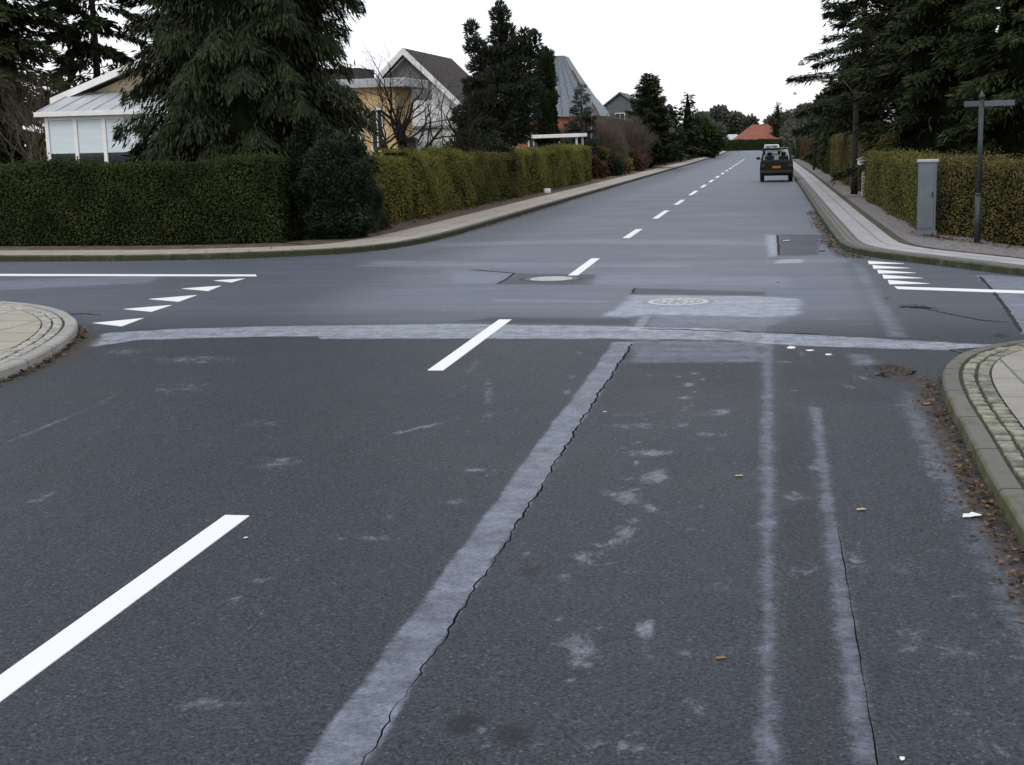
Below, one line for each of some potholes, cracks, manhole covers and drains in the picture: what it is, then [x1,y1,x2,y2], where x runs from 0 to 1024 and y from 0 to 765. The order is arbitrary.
crack [361,328,815,765]
pothole [864,363,929,381]
manhole cover [643,297,714,306]
